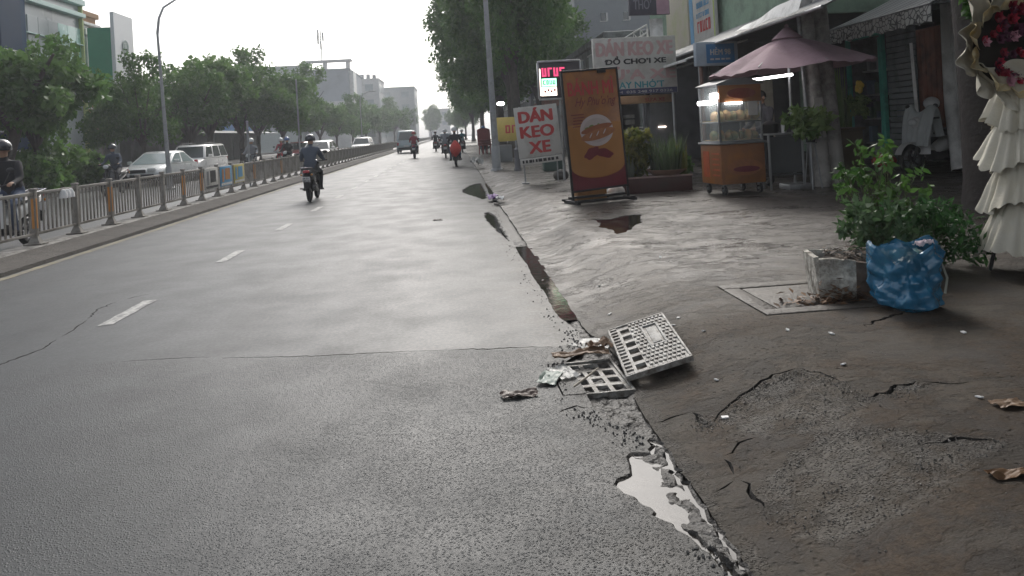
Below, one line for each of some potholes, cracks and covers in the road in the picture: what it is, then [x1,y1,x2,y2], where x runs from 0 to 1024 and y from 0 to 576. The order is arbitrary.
pothole [592,214,642,234]
crack [0,294,148,365]
crack [660,368,841,508]
crack [871,381,967,397]
pothole [614,438,755,576]
drain grate [607,312,694,382]
crack [921,436,990,445]
crack [864,312,907,327]
drain grate [549,359,636,399]
pothole [484,212,510,242]
